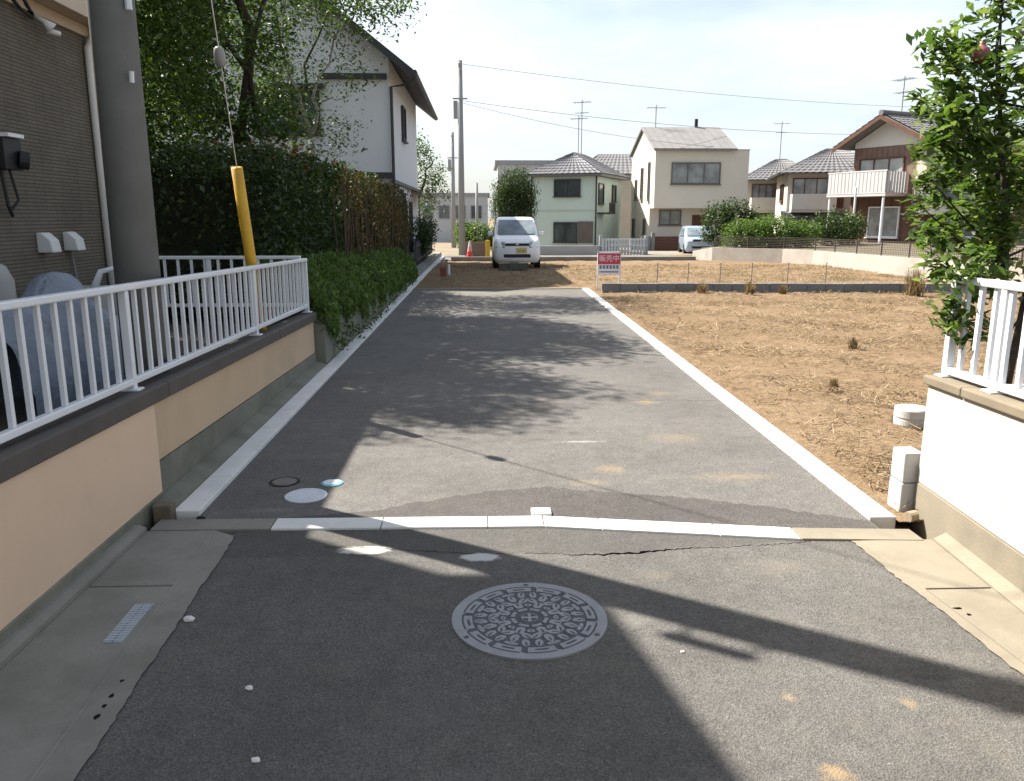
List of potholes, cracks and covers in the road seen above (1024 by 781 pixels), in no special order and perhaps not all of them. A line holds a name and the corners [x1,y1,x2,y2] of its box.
crack [344,541,810,556]
manhole cover [452,583,608,661]
manhole cover [269,477,300,487]
drain grate [103,604,154,643]
manhole cover [284,488,327,503]
manhole cover [320,479,344,487]
